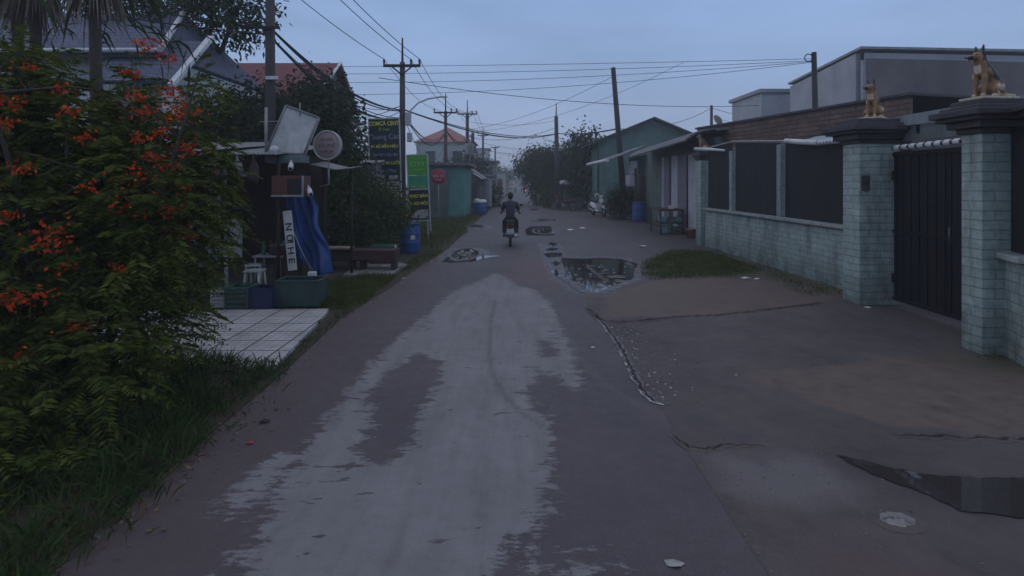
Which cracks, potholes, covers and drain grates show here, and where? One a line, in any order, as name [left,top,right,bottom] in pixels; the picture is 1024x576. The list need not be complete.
crack [668,433,765,453]
crack [585,302,829,406]
pothole [555,257,644,295]
pothole [445,248,485,261]
crack [890,431,1024,443]
